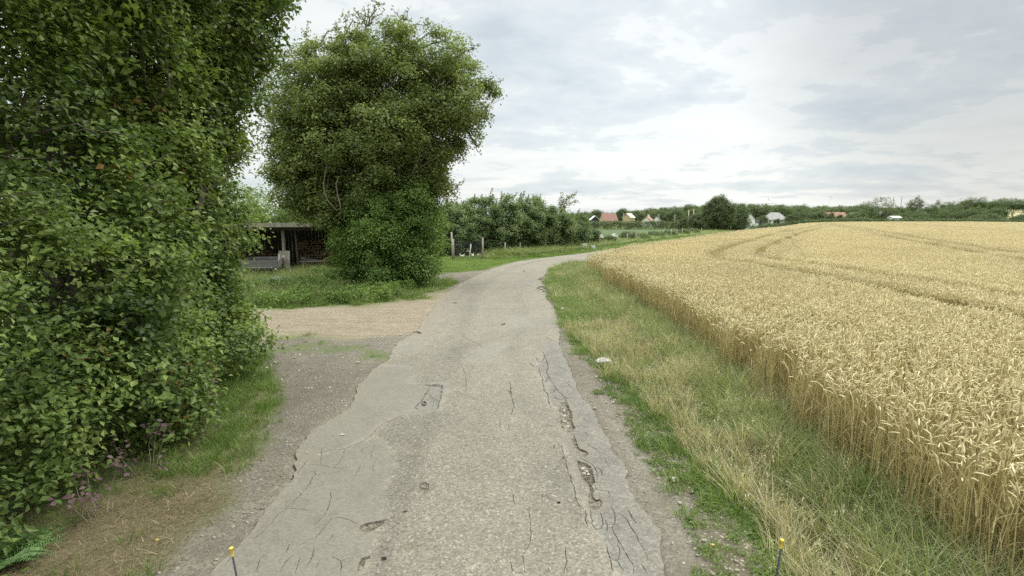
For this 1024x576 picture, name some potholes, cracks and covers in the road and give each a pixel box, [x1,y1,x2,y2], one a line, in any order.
crack [510,337,648,574]
pothole [359,520,385,532]
pothole [588,481,602,510]
pothole [576,460,595,485]
pothole [415,384,443,411]
pothole [559,401,576,432]
